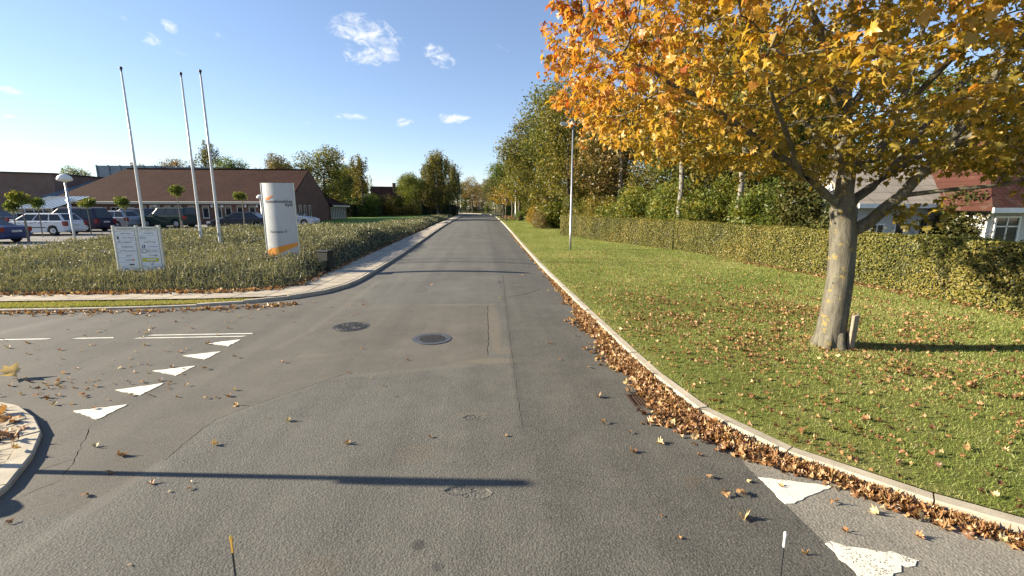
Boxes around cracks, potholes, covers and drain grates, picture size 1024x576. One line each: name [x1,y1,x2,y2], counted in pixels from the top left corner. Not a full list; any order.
manhole cover [332,322,370,332]
crack [14,424,92,500]
drain grate [625,394,658,407]
manhole cover [412,333,452,345]
crack [487,281,539,431]
